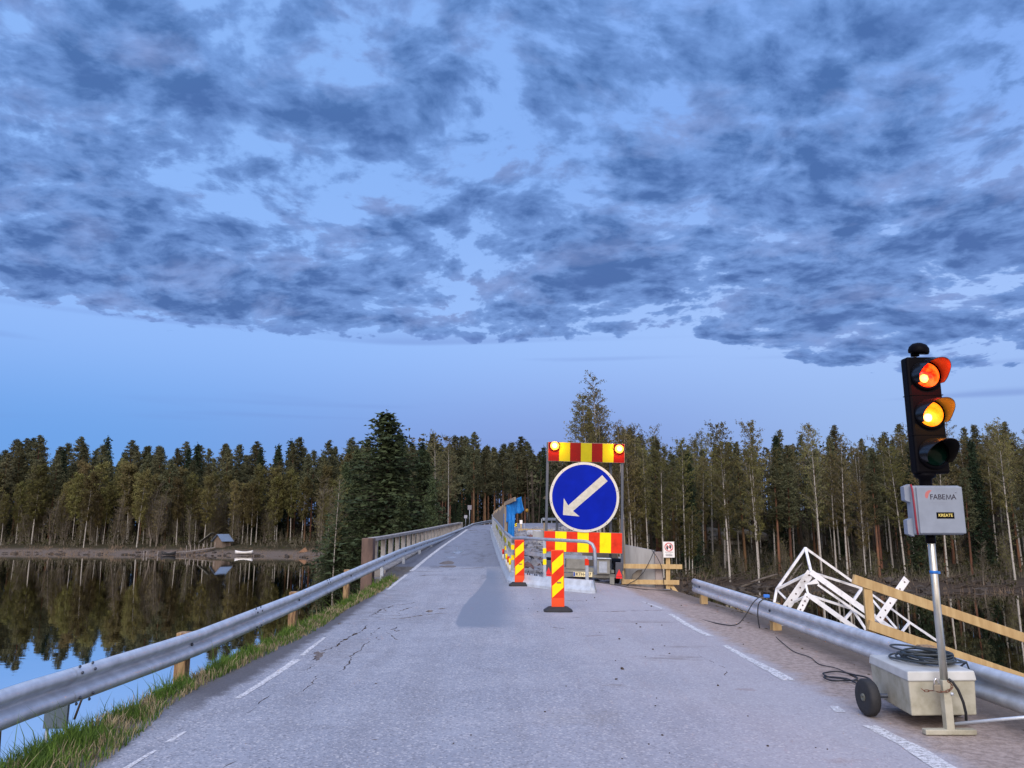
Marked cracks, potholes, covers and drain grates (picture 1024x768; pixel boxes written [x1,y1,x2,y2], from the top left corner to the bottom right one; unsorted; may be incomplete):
crack [299,602,439,693]
